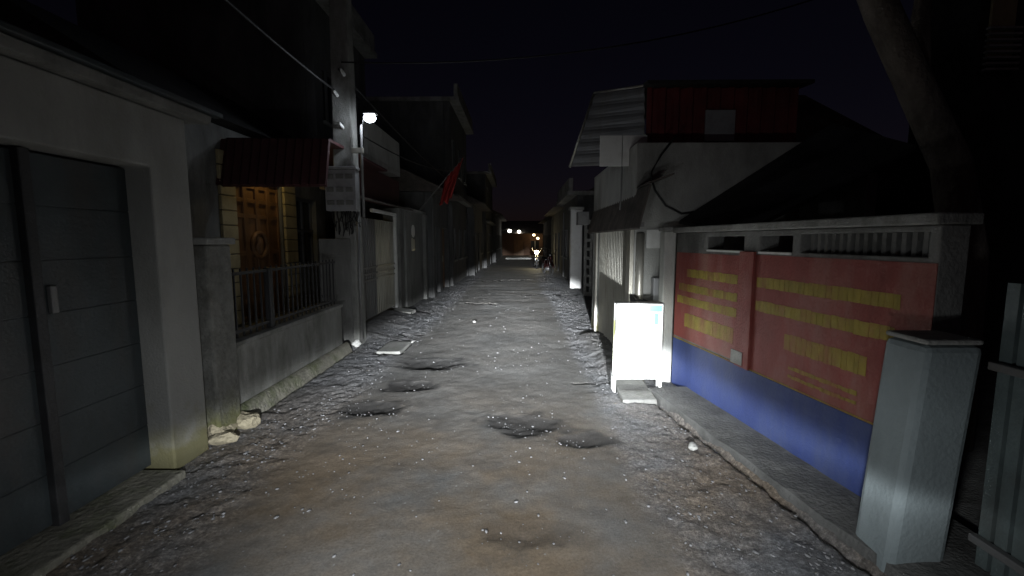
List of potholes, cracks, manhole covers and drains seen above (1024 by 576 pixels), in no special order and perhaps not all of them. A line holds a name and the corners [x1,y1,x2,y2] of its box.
pothole [483,517,573,547]
pothole [381,379,438,392]
pothole [400,358,477,370]
pothole [341,400,407,418]
pothole [485,413,568,438]
pothole [558,431,621,448]
